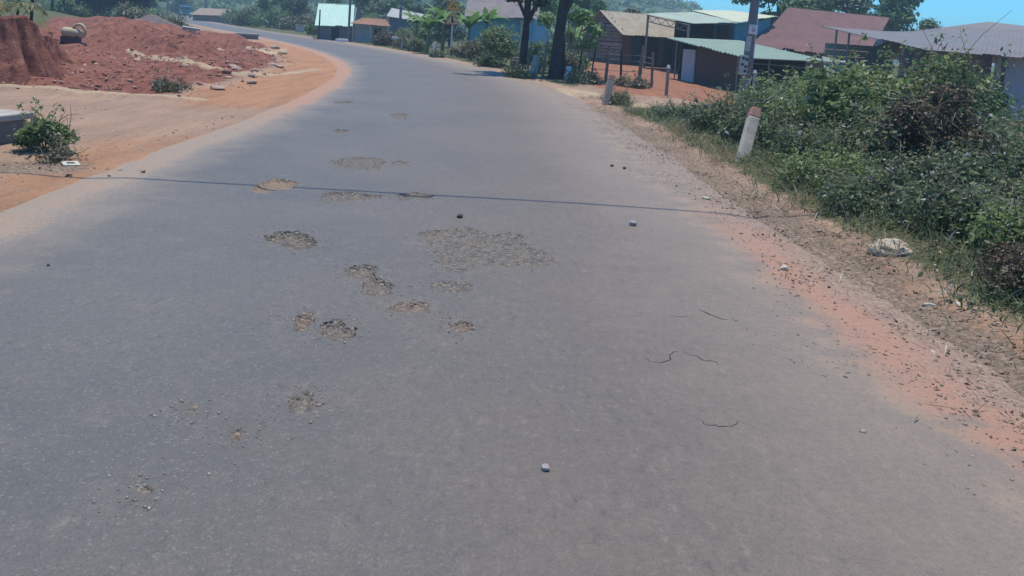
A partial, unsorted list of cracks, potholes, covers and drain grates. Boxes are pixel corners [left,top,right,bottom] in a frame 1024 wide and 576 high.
pothole [386,301,433,314]
pothole [428,281,473,293]
pothole [263,230,318,251]
pothole [319,318,358,342]
pothole [330,157,388,170]
pothole [293,312,316,331]
pothole [344,263,395,296]
pothole [248,178,299,193]
pothole [287,389,315,414]
pothole [448,320,475,333]
pothole [321,192,382,203]
